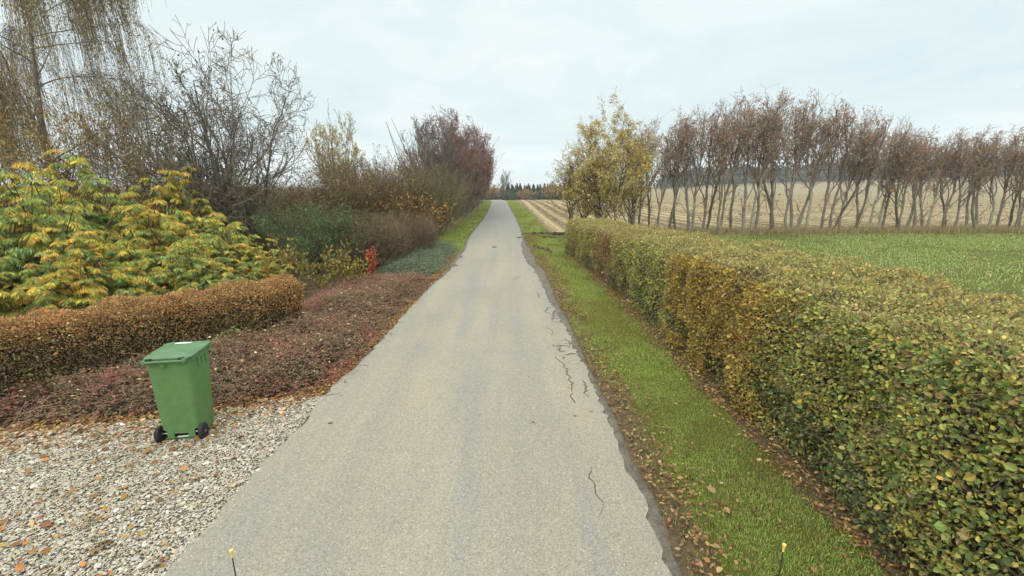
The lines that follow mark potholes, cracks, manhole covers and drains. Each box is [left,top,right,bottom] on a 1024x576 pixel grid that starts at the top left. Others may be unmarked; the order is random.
crack [537,292,588,402]
crack [588,466,604,515]
